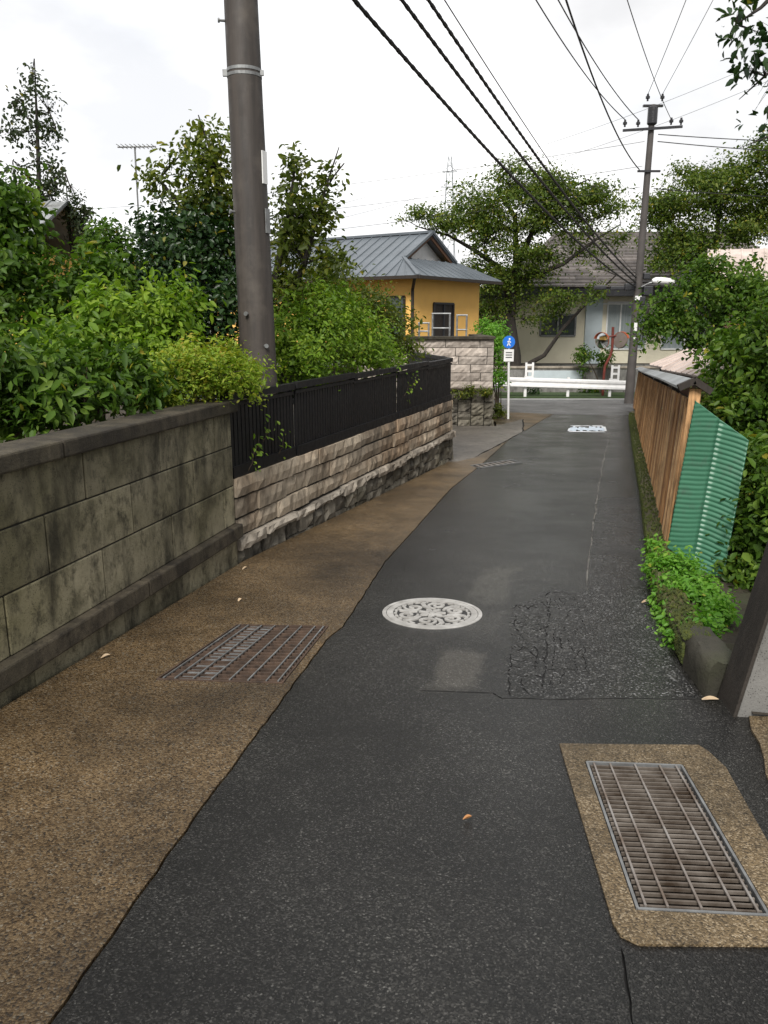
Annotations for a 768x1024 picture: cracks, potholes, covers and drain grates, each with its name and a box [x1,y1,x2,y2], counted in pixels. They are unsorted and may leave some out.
drain grate [470,460,522,469]
manhole cover [382,598,482,629]
drain grate [559,743,768,947]
crack [419,592,694,700]
drain grate [157,624,328,684]
crack [620,947,633,1024]
